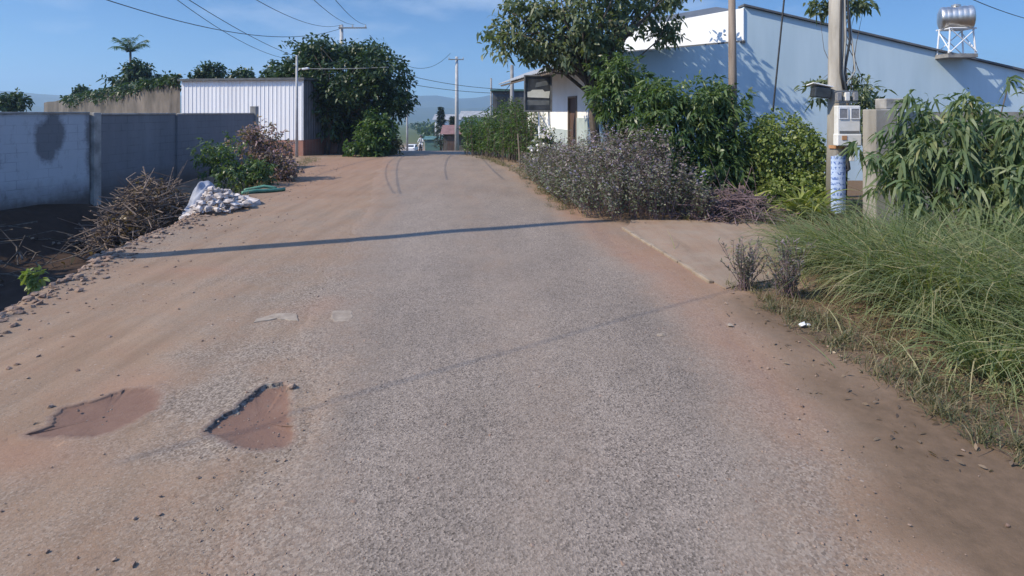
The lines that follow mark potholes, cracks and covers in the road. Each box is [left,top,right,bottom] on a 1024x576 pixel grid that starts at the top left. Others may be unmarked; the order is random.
pothole [184,377,310,461]
pothole [7,381,177,447]
